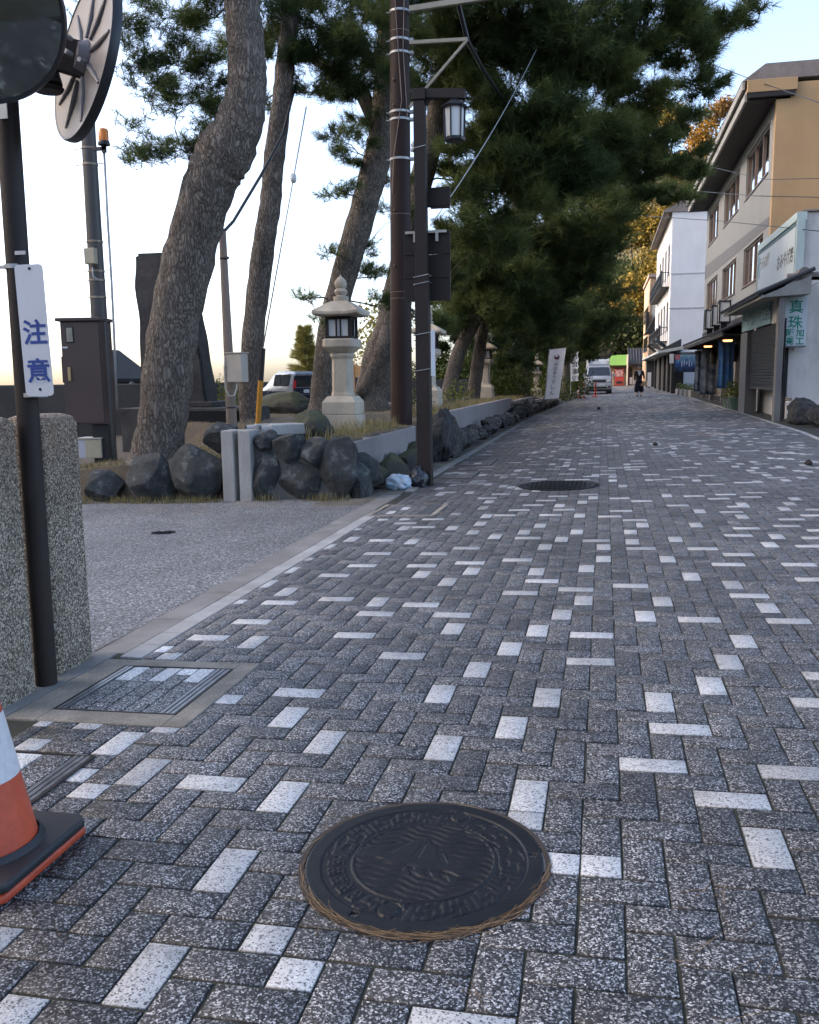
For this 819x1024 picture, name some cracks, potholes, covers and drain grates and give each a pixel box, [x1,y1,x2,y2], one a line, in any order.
manhole cover [6,659,259,729]
manhole cover [298,802,551,942]
manhole cover [518,480,599,491]
